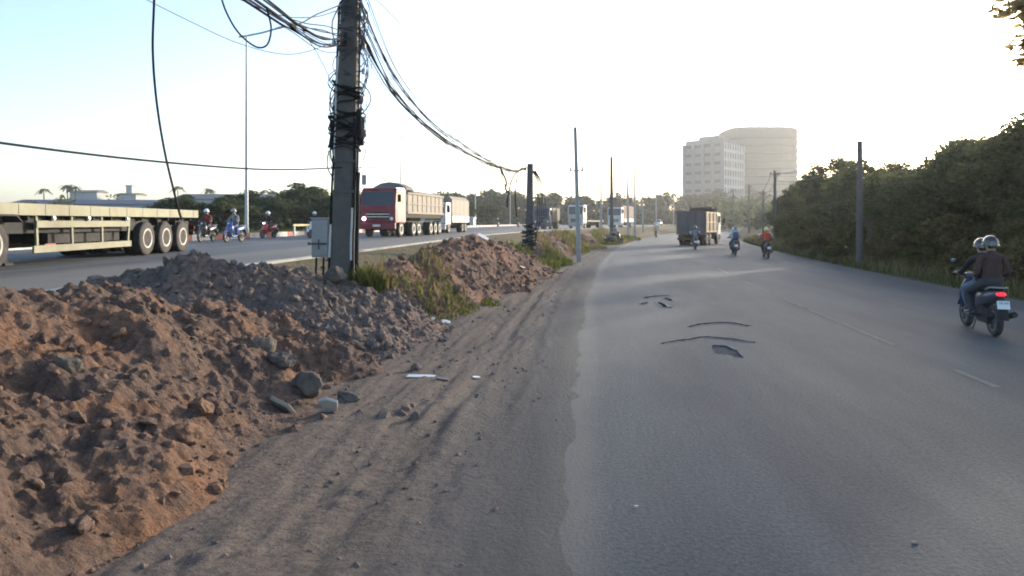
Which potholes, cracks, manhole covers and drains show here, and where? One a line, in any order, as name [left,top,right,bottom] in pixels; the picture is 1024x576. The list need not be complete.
crack [661,322,755,344]
pothole [712,345,744,358]
